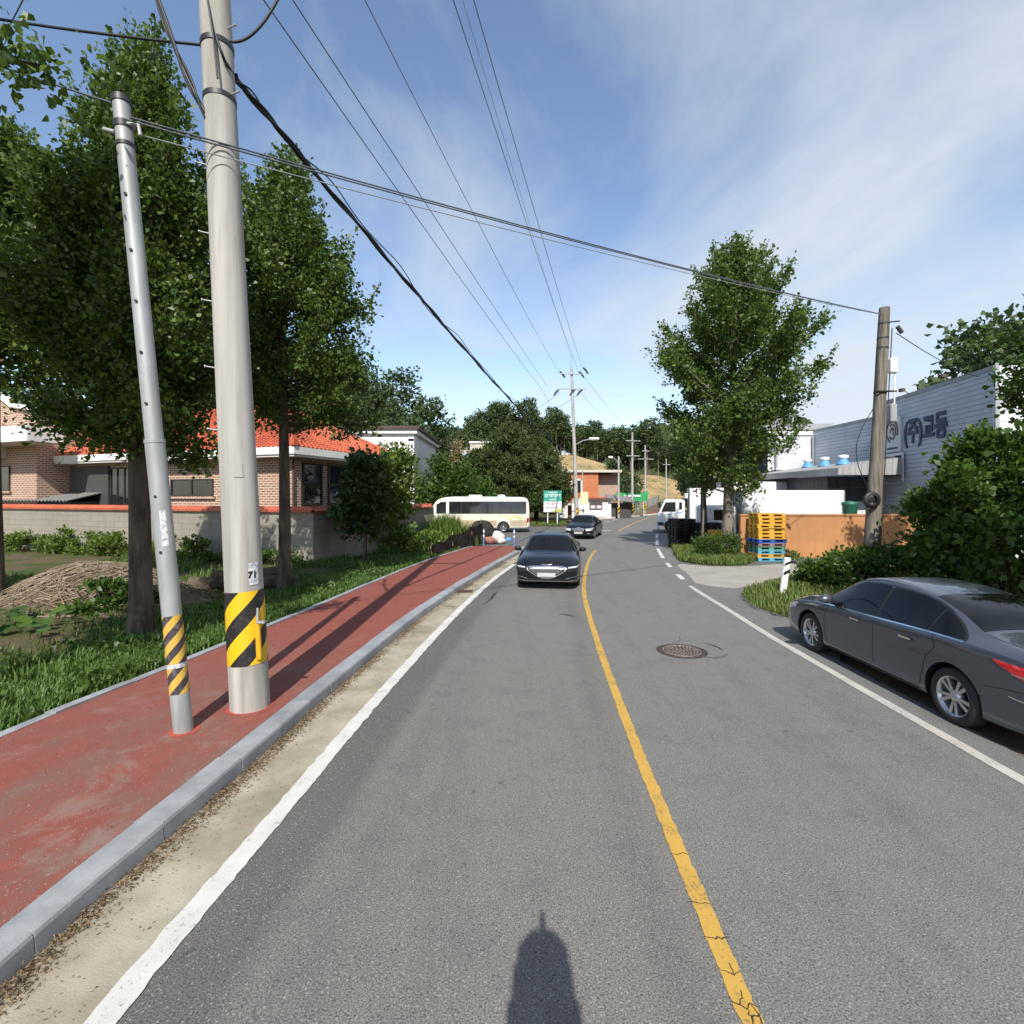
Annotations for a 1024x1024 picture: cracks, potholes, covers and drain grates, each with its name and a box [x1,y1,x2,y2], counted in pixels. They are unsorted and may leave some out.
crack [720,963,763,1024]
crack [674,637,728,659]
manhole cover [657,644,708,659]
